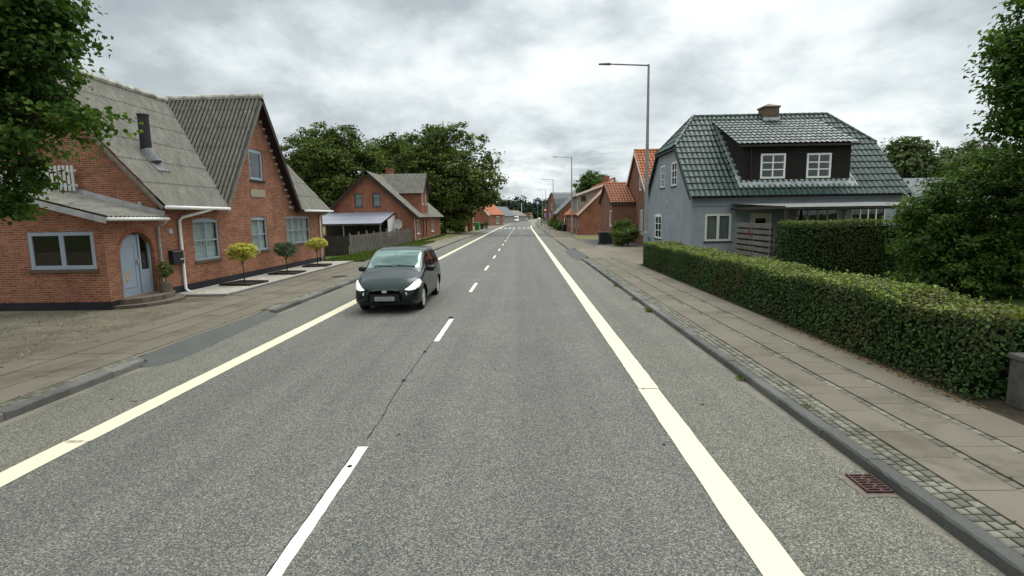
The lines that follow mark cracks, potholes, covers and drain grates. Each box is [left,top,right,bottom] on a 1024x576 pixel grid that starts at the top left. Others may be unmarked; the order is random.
drain grate [834,473,899,498]
crack [265,318,450,576]
